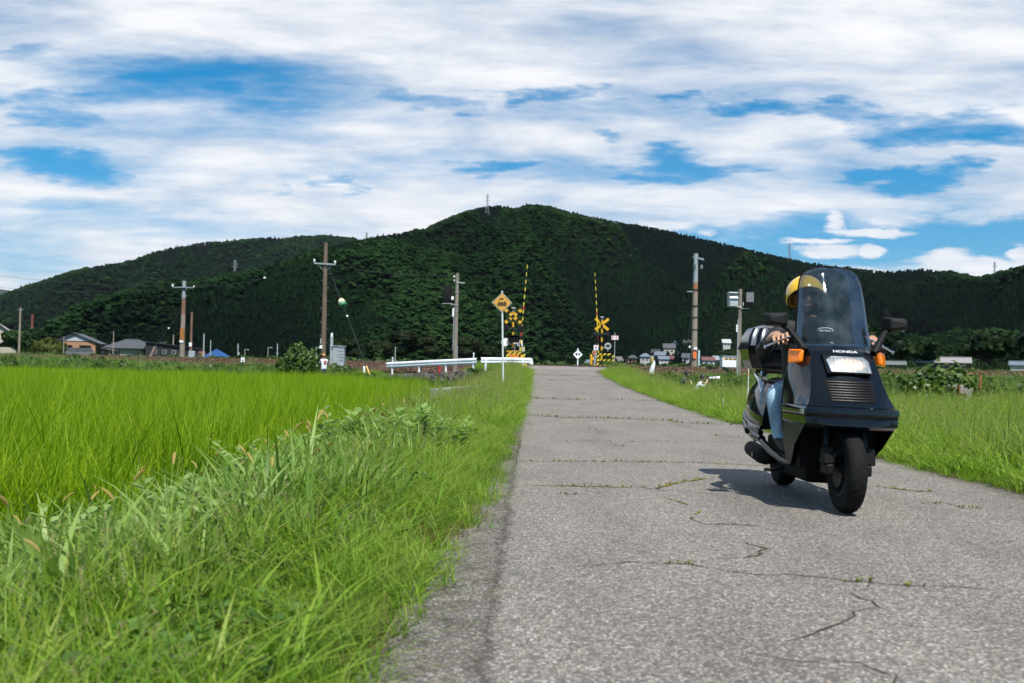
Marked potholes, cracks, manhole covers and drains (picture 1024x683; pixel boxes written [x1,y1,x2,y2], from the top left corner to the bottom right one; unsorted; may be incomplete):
crack [487,477,1024,641]
